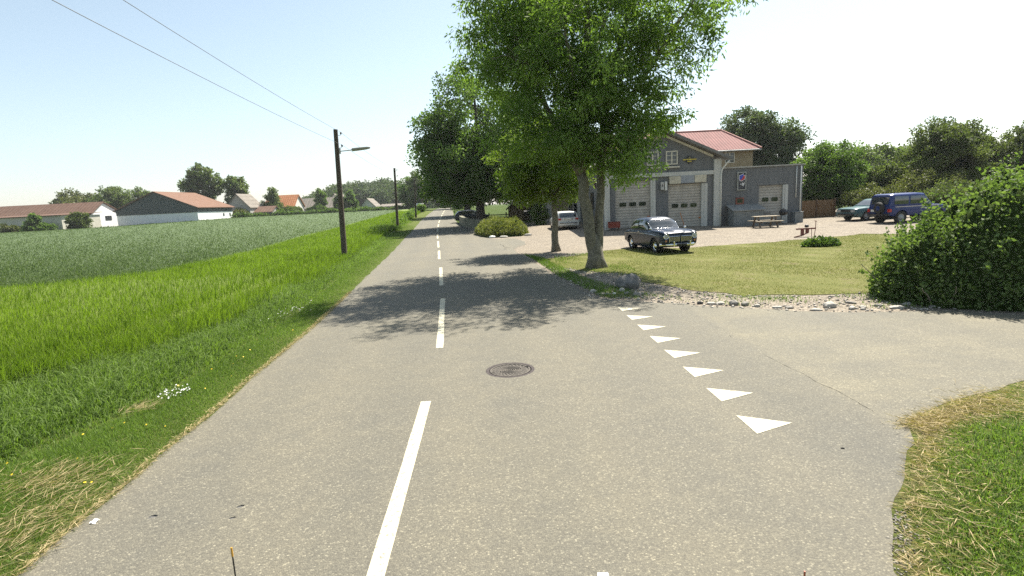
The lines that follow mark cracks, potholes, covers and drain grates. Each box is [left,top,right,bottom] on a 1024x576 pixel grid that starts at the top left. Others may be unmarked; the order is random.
manhole cover [486,363,535,378]
